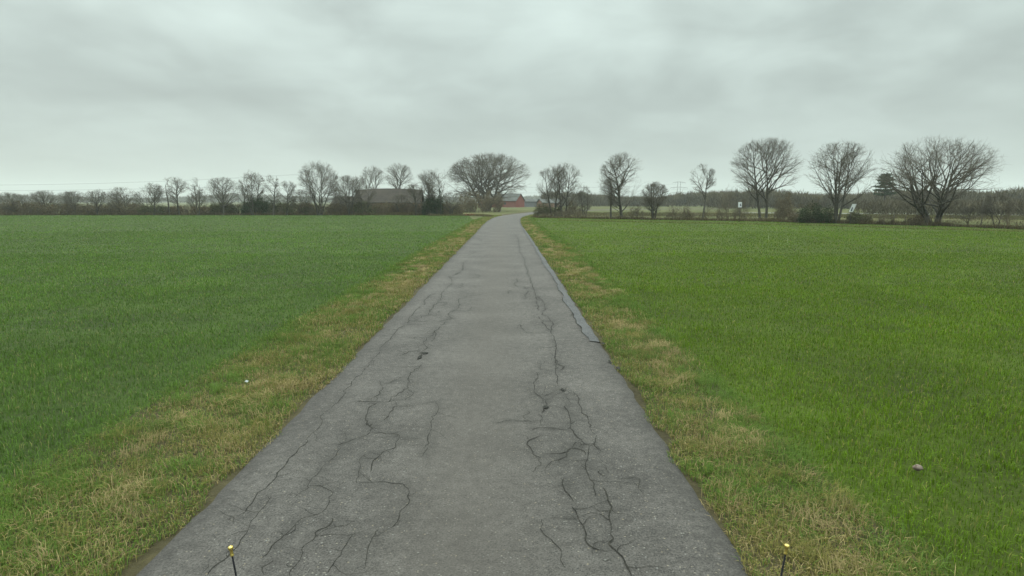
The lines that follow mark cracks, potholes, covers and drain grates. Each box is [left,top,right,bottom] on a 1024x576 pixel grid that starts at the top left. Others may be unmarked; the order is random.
crack [502,241,666,575]
crack [206,239,482,576]
